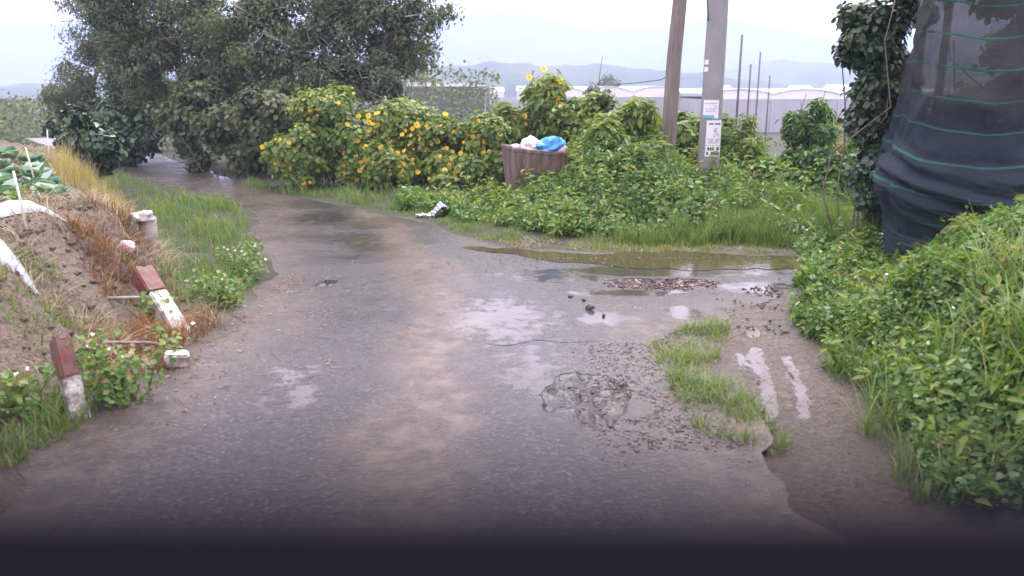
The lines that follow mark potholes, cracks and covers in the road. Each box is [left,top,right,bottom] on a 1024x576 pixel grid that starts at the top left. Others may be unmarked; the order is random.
pothole [539,371,632,431]
